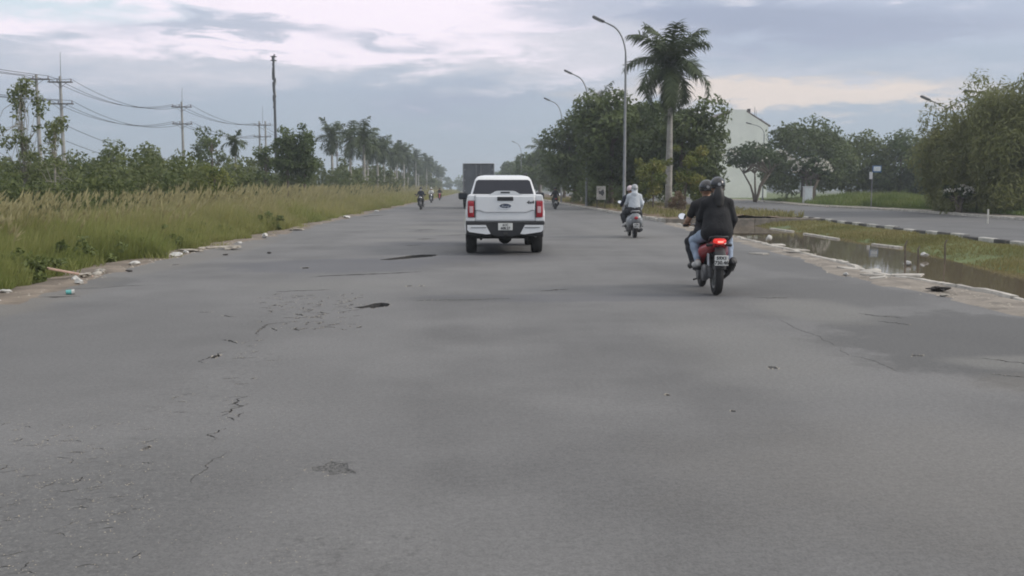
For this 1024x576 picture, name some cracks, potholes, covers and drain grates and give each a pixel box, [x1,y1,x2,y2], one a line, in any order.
crack [190,397,247,483]
pothole [312,461,356,475]
crack [1,424,150,536]
crack [199,289,365,362]
